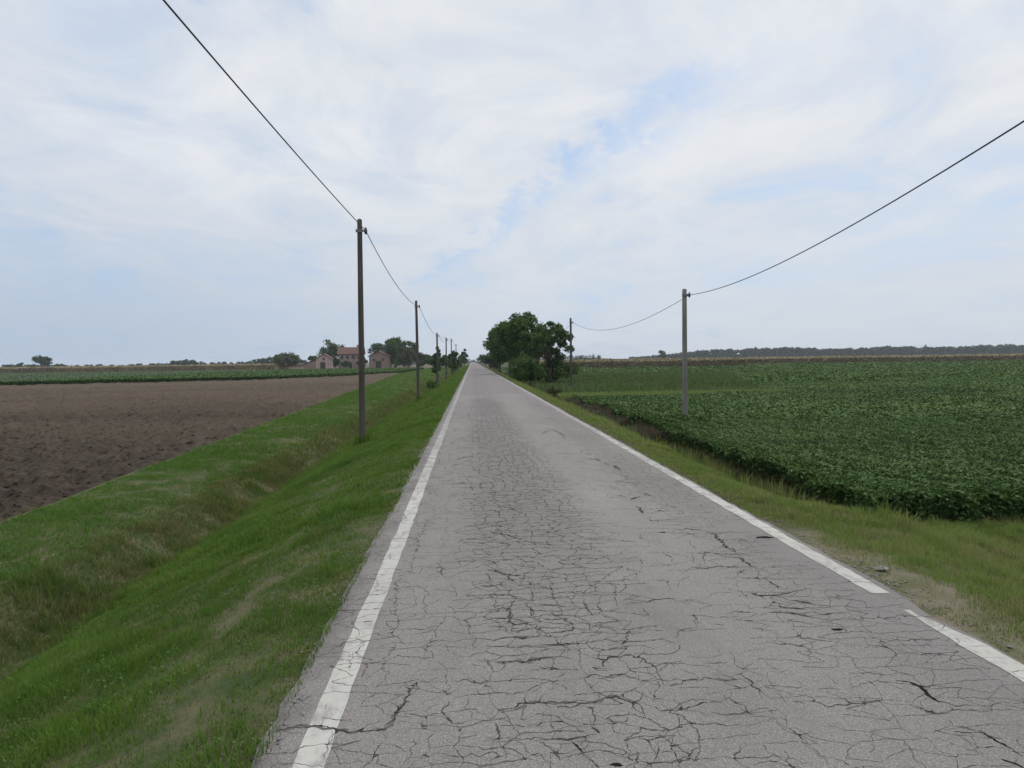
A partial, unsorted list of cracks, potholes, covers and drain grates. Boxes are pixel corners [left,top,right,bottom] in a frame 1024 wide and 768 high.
crack [255,397,1024,768]
